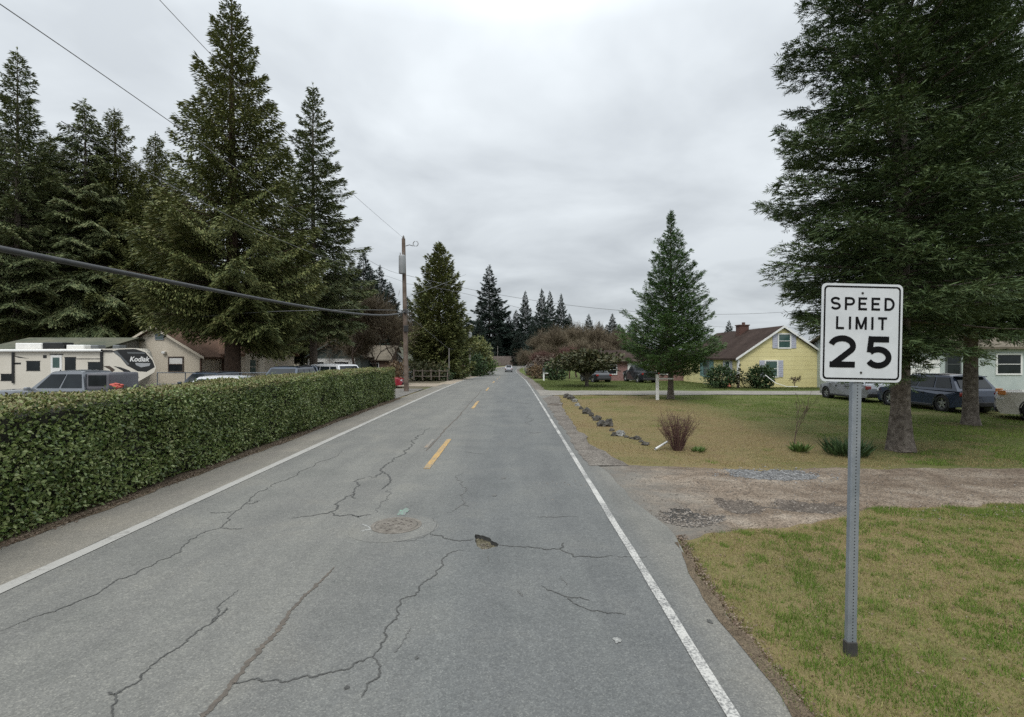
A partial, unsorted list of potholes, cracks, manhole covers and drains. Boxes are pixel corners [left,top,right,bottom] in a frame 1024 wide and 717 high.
crack [6,456,336,629]
manhole cover [371,517,422,534]
pothole [475,534,499,549]
crack [237,476,648,697]
crack [294,429,427,518]
crack [109,589,239,717]
